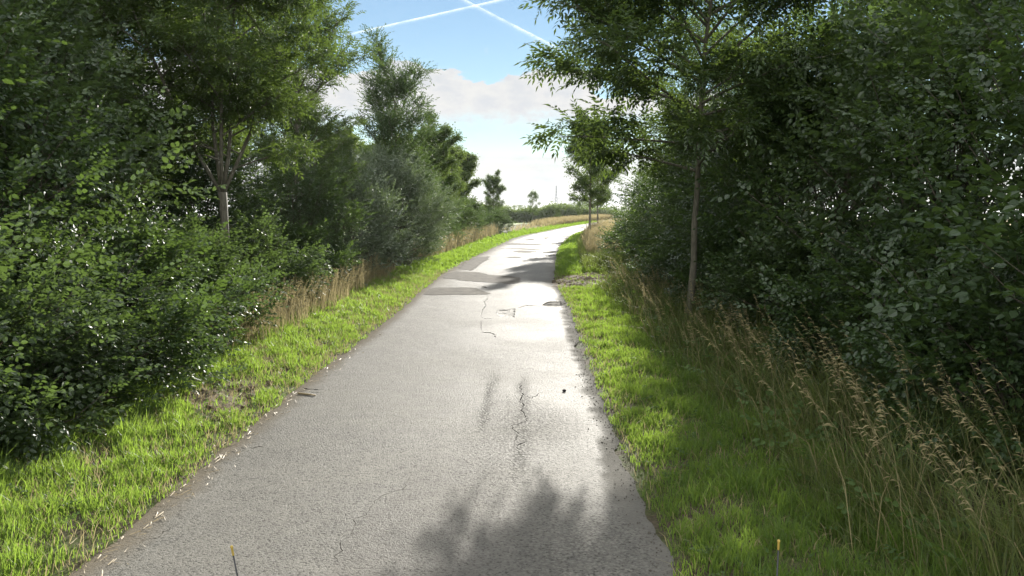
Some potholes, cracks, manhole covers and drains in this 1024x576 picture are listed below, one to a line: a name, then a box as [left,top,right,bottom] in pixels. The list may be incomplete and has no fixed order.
crack [511,377,539,452]
crack [331,466,413,573]
